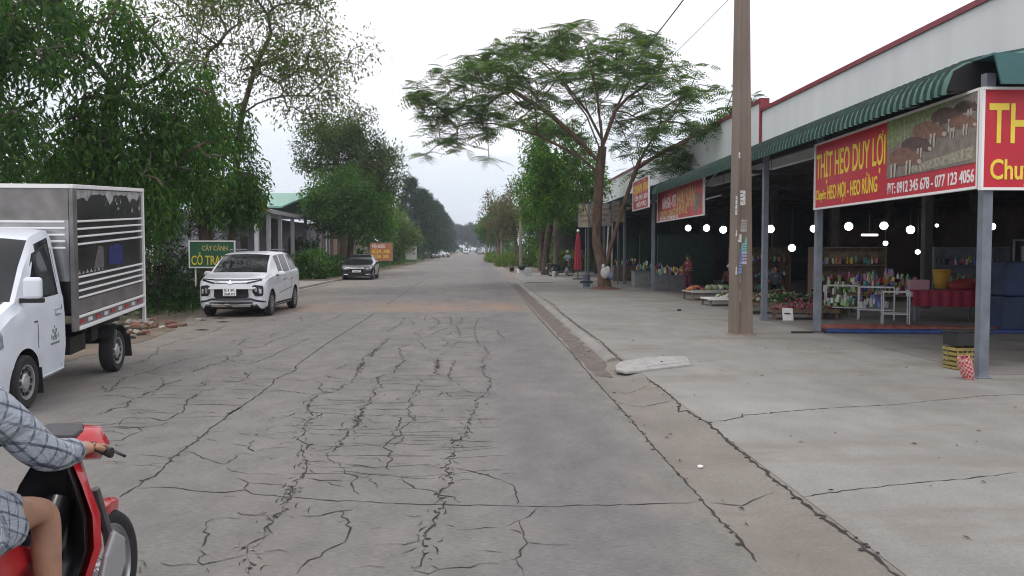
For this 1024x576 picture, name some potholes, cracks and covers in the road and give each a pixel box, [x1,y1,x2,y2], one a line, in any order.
crack [77,279,1023,576]
